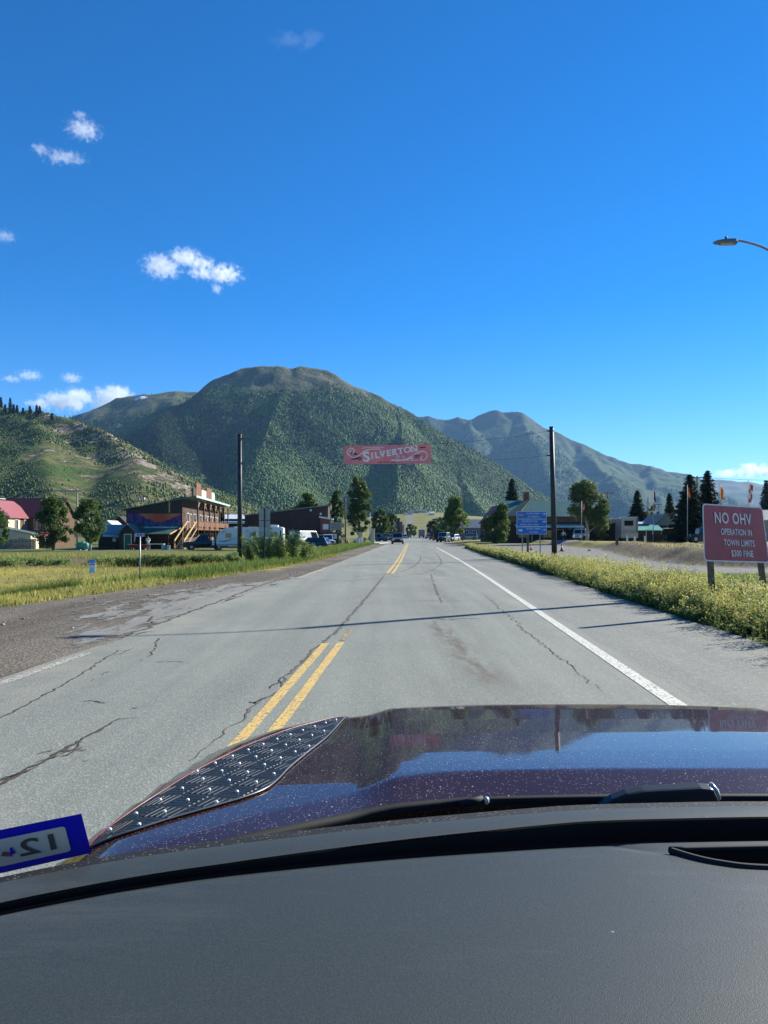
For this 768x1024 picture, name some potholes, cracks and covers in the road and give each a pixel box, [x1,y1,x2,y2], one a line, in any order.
crack [417,595,612,698]
crack [0,639,181,786]
